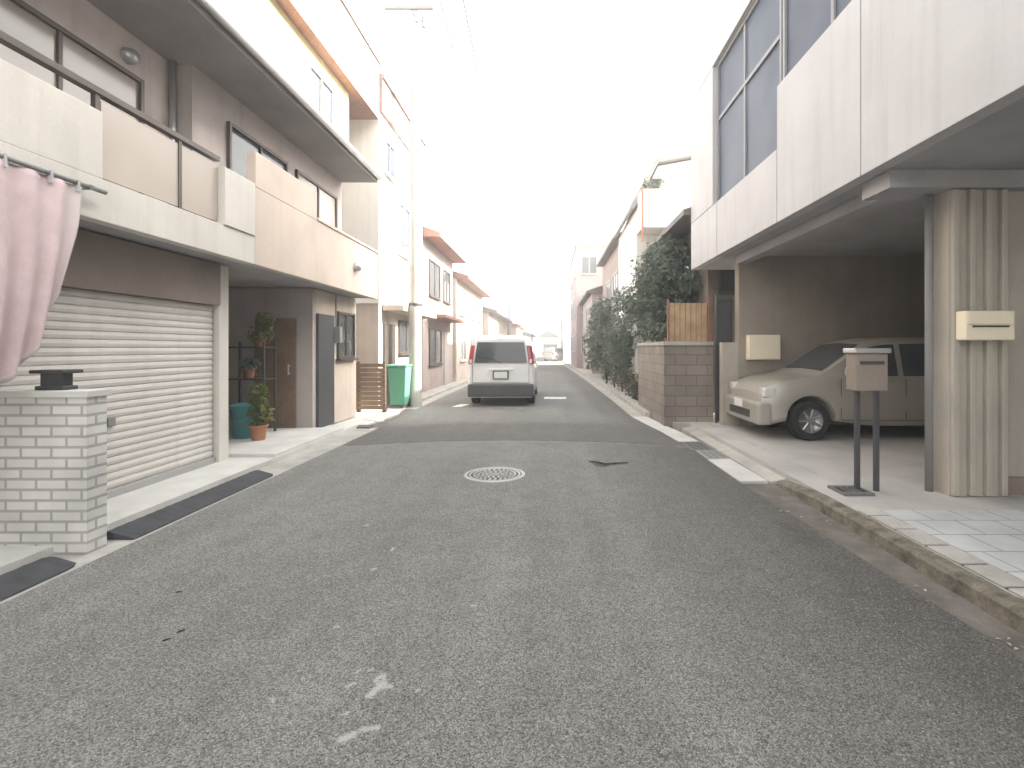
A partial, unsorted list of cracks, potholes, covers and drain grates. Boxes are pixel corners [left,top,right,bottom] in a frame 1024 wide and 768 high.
manhole cover [464,467,525,482]
